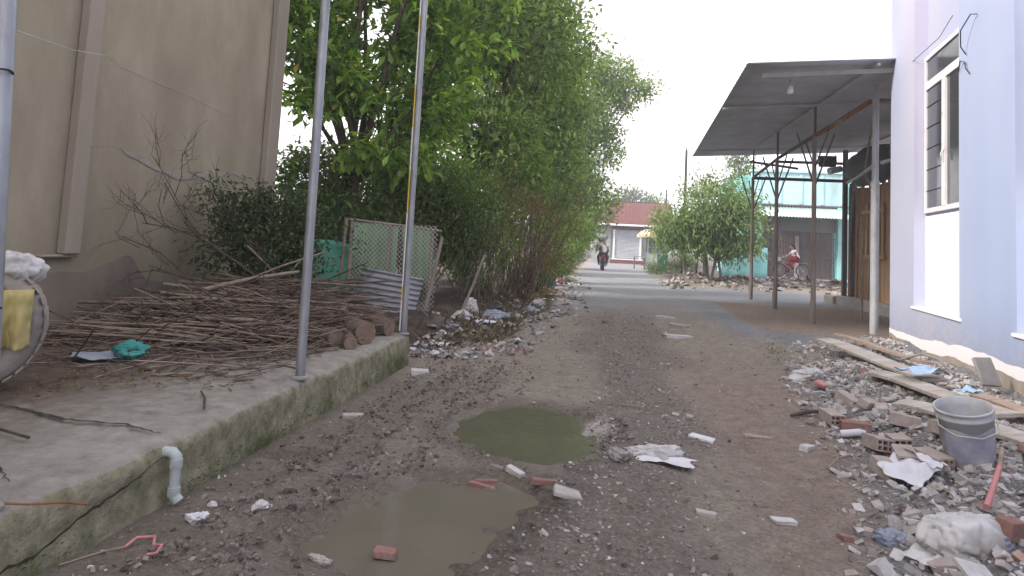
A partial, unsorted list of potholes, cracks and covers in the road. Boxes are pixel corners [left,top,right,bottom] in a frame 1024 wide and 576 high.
pothole [437,401,613,469]
pothole [276,469,561,576]
